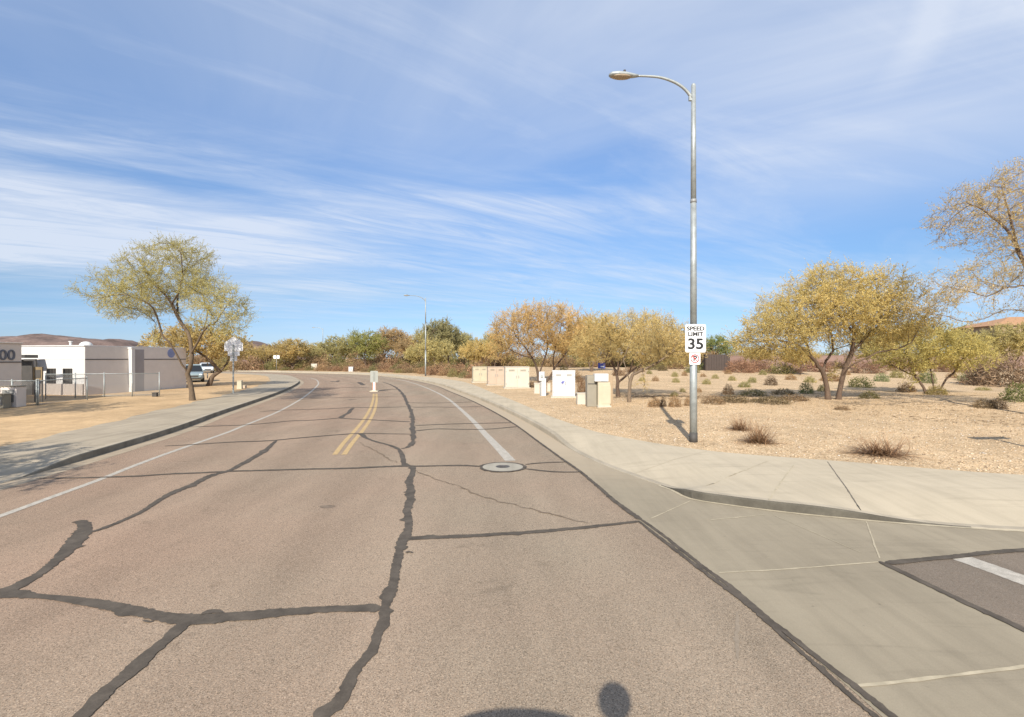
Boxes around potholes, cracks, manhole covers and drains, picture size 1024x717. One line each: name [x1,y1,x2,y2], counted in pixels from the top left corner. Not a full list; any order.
manhole cover [479,462,527,472]
crack [416,470,588,523]
